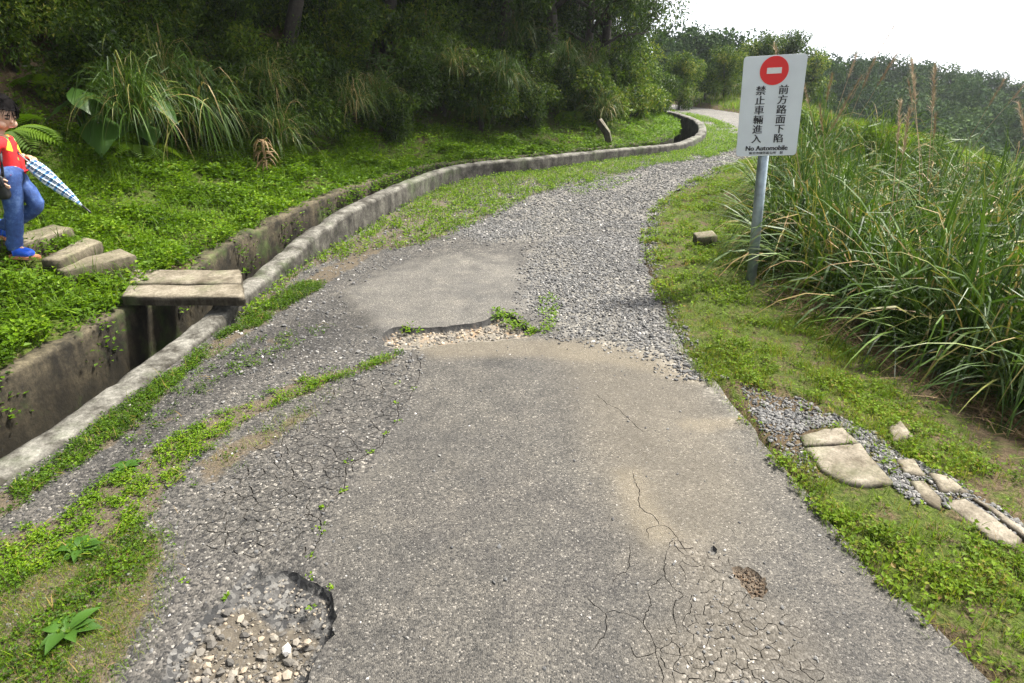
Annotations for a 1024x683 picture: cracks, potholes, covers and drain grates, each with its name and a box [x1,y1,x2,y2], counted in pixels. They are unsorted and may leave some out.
crack [625,525,825,683]
pothole [732,566,768,599]
crack [587,597,620,650]
crack [193,355,421,562]
pothole [161,563,337,683]
